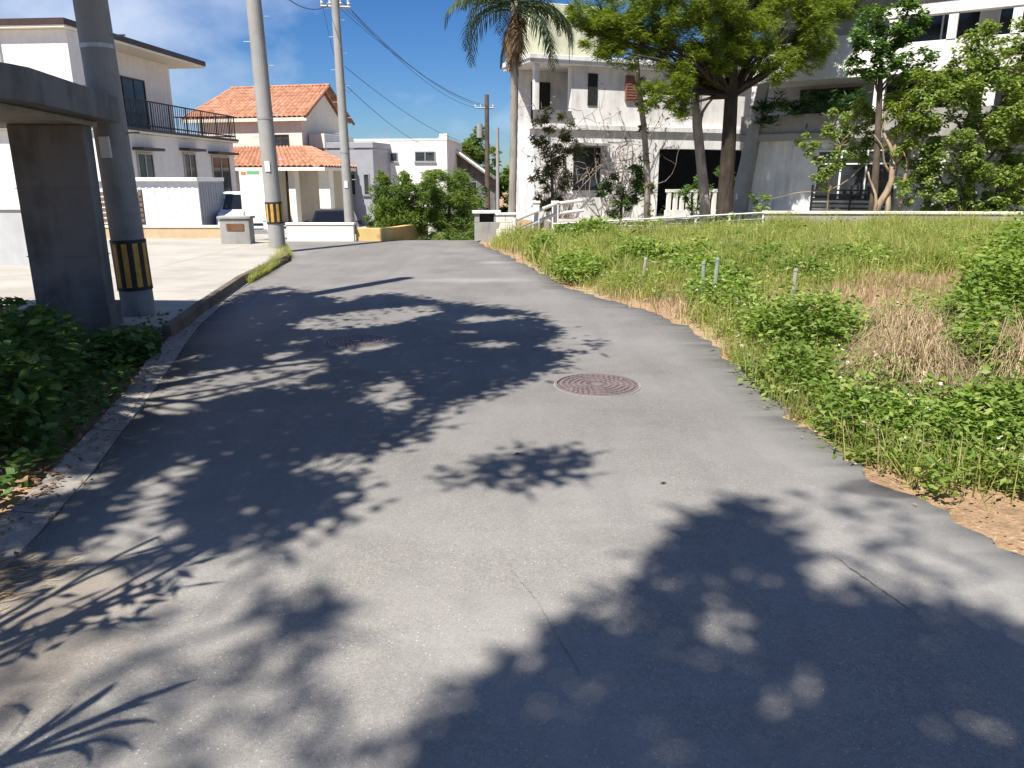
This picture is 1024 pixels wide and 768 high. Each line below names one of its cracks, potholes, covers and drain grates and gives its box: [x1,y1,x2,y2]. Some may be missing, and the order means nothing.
manhole cover [554,373,641,397]
crack [501,551,581,676]
manhole cover [323,334,389,349]
crack [827,552,924,619]
